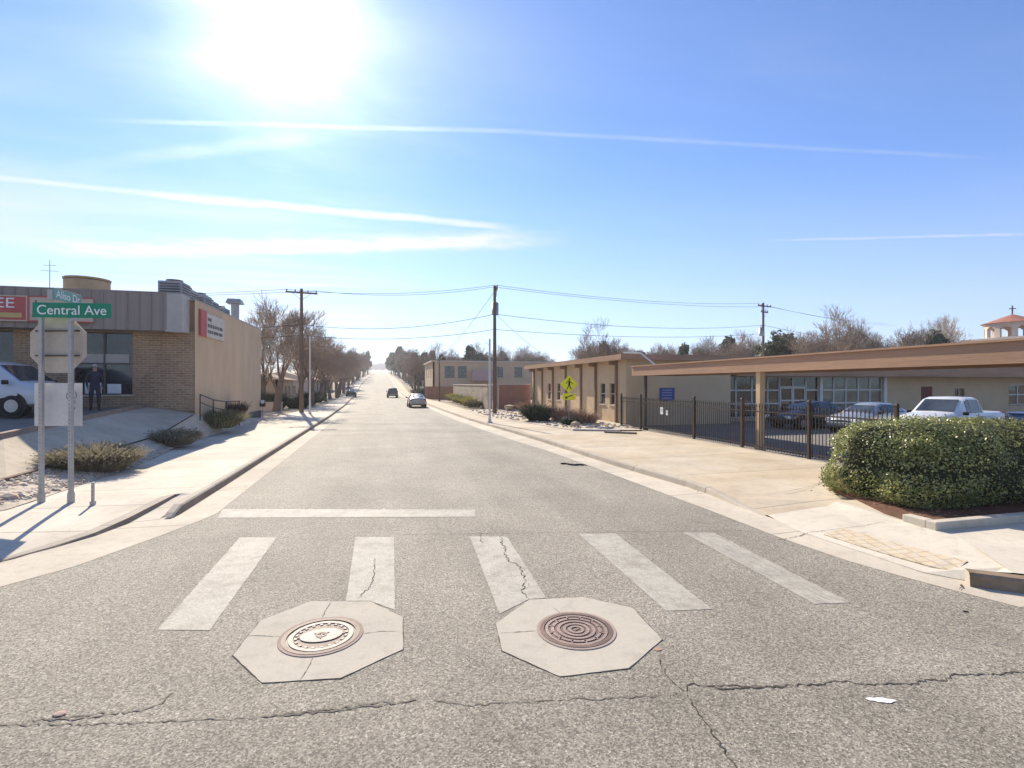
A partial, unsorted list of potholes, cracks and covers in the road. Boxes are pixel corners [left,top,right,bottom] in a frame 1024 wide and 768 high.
crack [0,692,419,726]
manhole cover [277,617,363,657]
crack [480,531,529,598]
crack [424,659,1024,768]
manhole cover [537,612,616,650]
